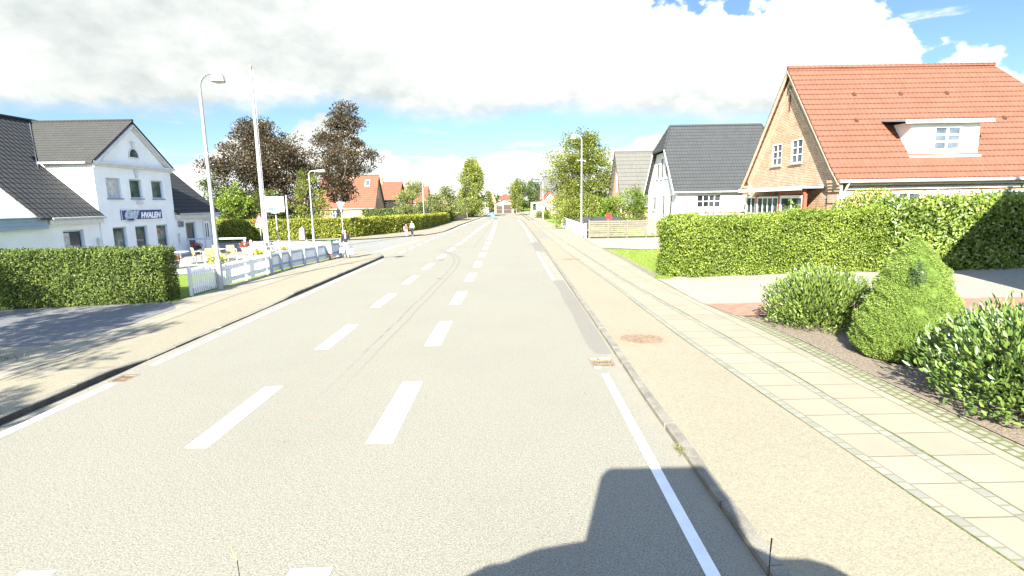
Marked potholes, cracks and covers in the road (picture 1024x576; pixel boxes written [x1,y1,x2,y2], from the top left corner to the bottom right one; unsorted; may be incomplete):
drain grate [589,358,616,368]
manhole cover [620,334,663,345]
